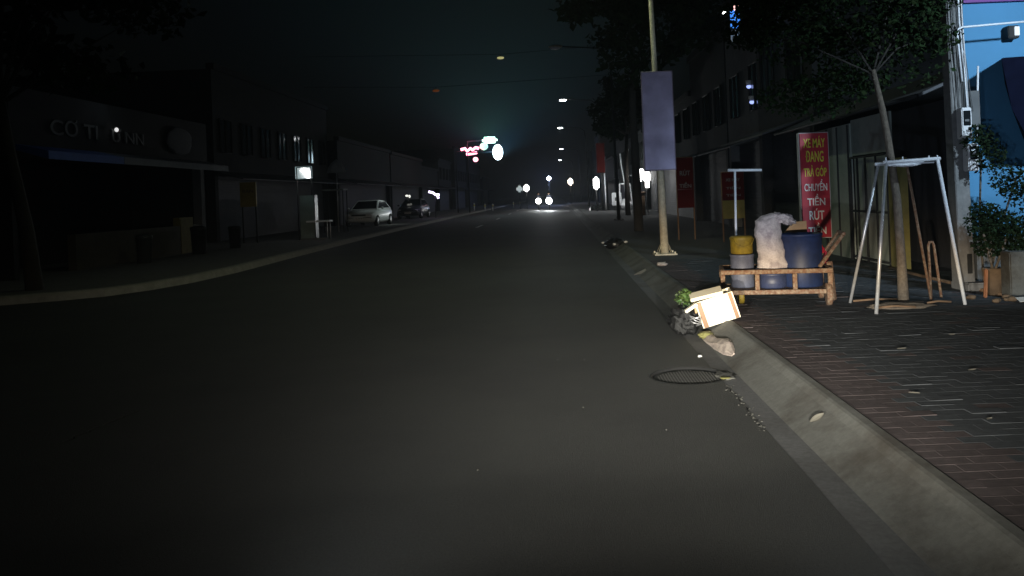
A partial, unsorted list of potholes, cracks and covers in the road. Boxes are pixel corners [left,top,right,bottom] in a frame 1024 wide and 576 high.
manhole cover [649,366,737,385]
